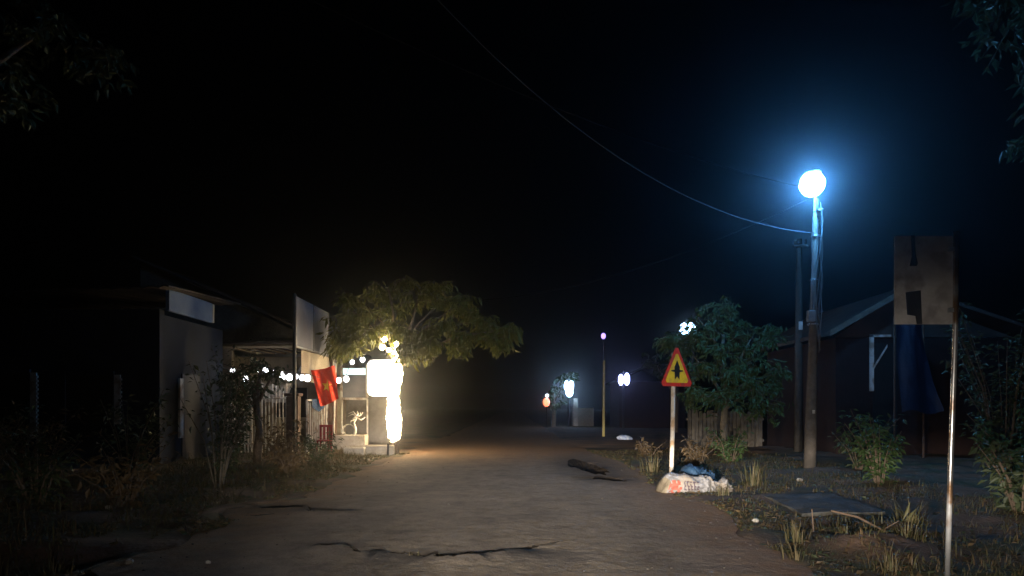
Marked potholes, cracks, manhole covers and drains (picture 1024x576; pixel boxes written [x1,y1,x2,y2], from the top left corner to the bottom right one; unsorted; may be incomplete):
crack [350,540,572,557]
